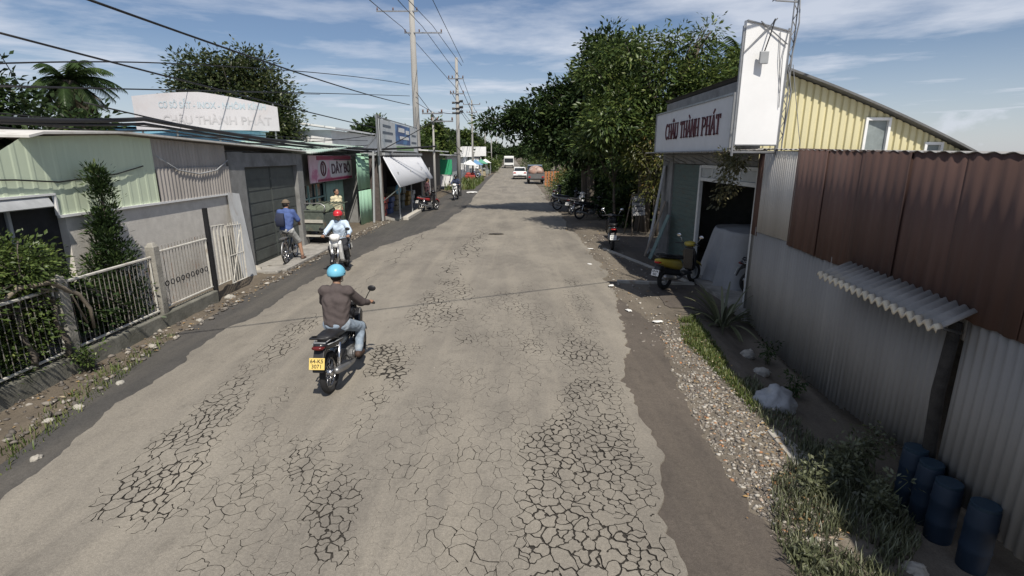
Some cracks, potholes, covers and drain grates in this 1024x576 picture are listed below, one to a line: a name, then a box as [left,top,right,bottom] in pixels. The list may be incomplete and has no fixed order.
crack [81,282,680,576]
crack [403,231,482,344]
